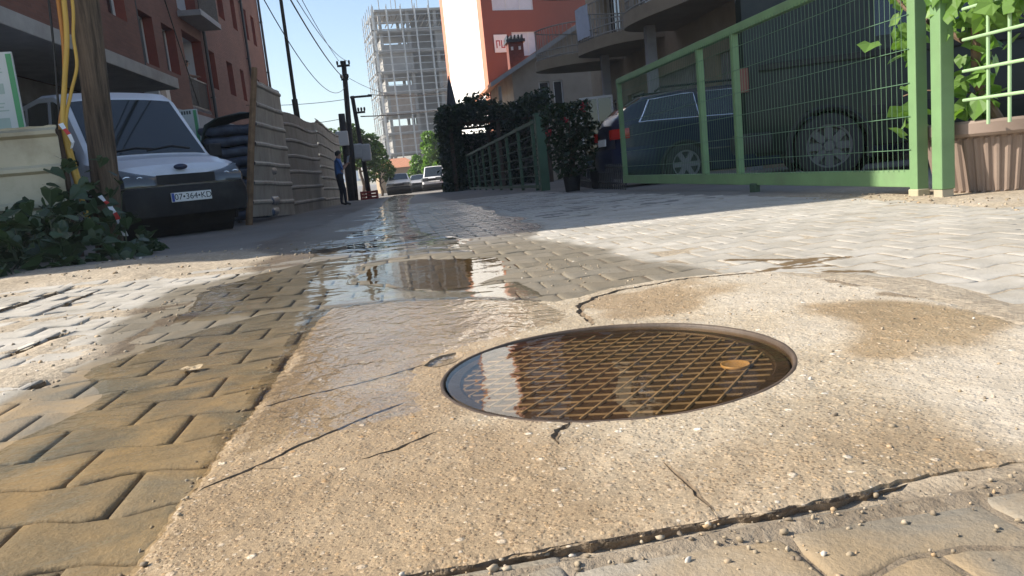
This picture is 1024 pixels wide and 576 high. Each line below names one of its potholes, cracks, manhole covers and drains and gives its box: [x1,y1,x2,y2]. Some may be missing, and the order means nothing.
manhole cover [440,323,798,423]
crack [575,273,754,325]
crack [551,422,572,445]
crack [204,365,443,488]
crack [405,463,909,576]
